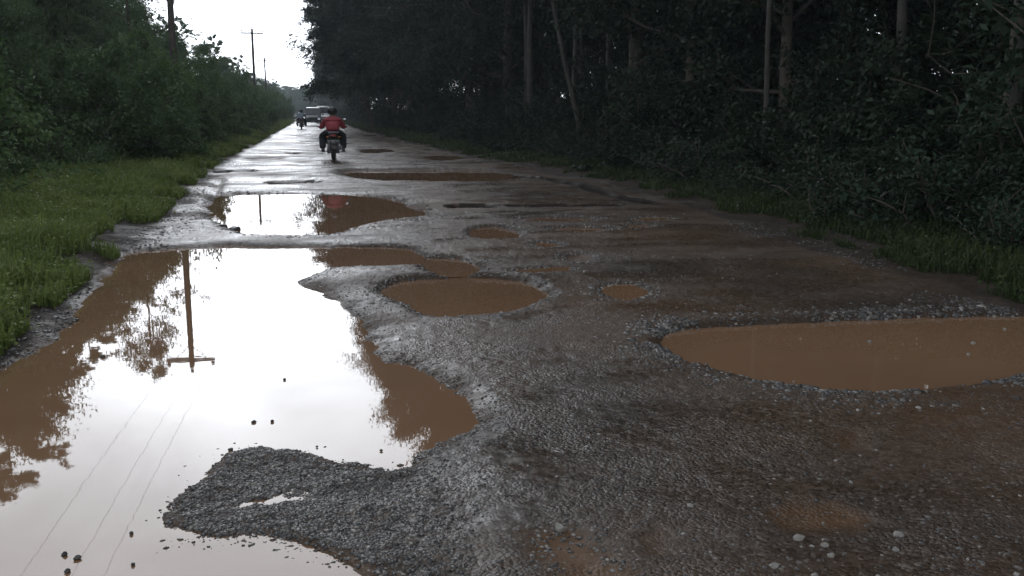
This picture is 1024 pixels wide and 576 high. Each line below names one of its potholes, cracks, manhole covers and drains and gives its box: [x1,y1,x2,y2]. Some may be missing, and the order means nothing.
pothole [375,272,558,317]
pothole [465,223,525,239]
pothole [0,241,497,576]
pothole [334,166,522,182]
pothole [650,310,1024,392]
pothole [200,191,434,235]
pothole [594,281,658,301]
